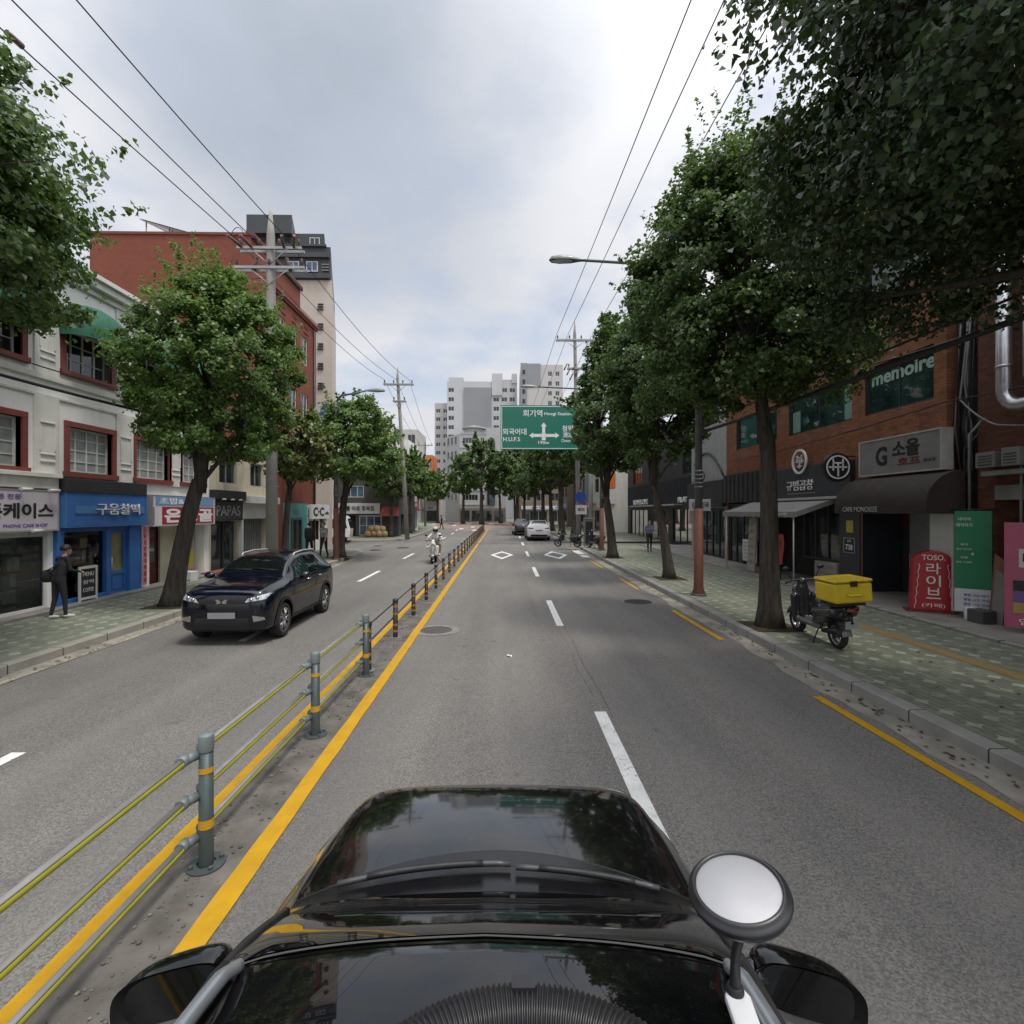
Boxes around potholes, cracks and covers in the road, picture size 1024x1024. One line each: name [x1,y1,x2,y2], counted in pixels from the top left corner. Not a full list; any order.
manhole cover [413,625,460,636]
